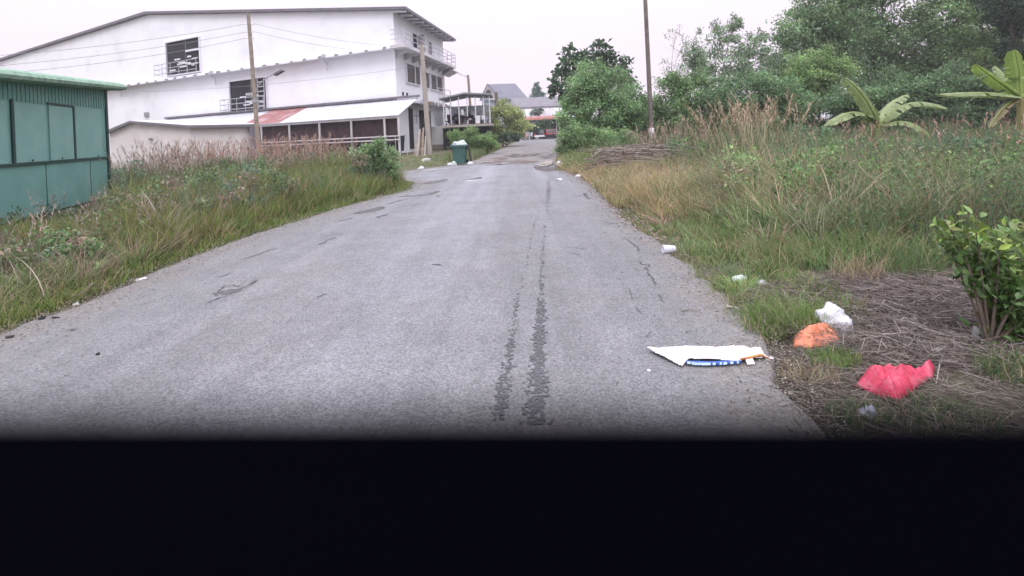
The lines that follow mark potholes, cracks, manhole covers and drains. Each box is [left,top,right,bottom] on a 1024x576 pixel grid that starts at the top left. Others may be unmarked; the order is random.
crack [600,220,662,311]
crack [318,192,436,245]
crack [208,272,257,303]
